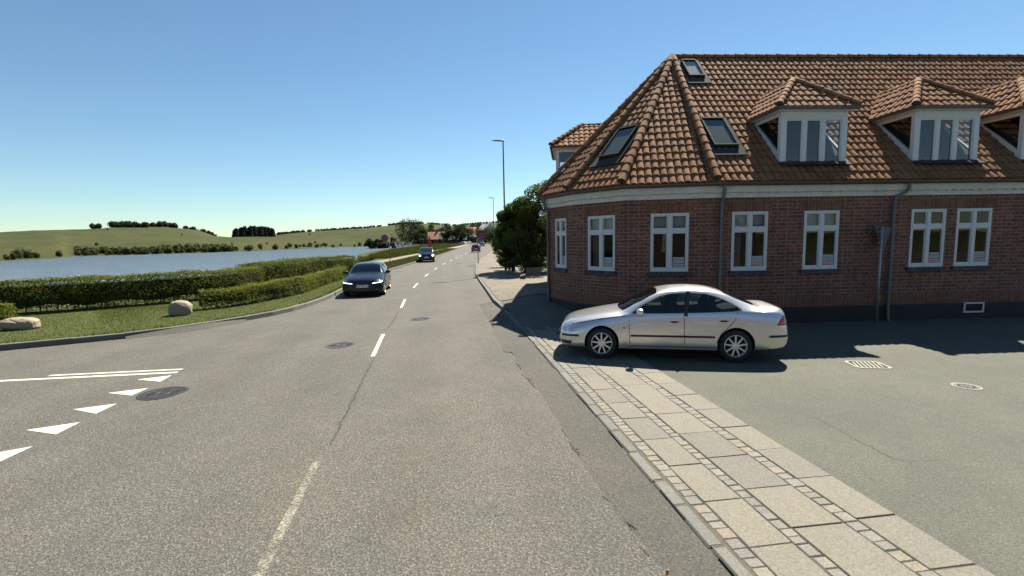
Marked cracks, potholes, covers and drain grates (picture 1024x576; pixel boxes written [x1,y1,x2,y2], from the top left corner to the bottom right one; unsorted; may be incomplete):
crack [330,356,375,444]
manhole cover [136,386,189,401]
drain grate [844,361,892,369]
